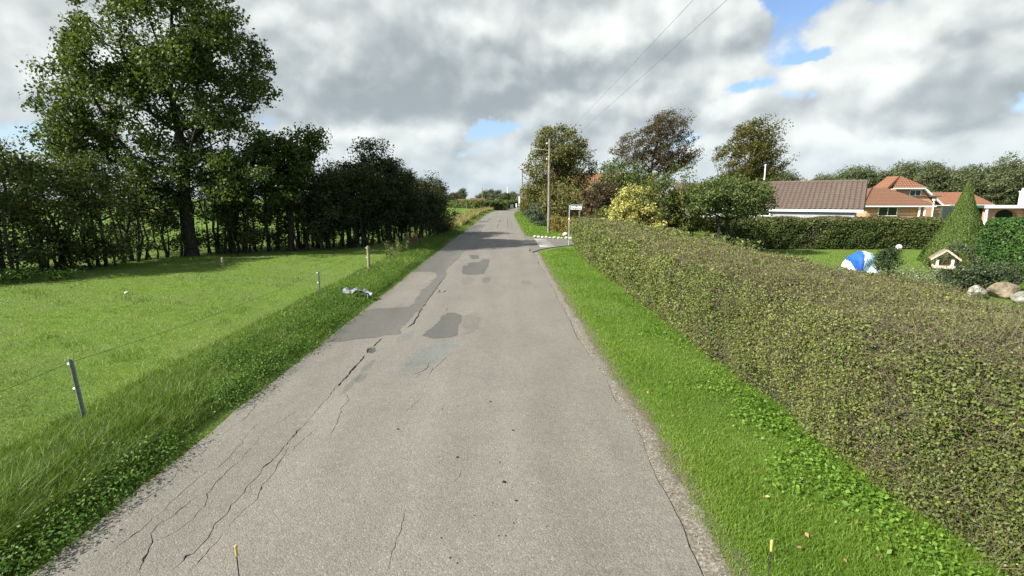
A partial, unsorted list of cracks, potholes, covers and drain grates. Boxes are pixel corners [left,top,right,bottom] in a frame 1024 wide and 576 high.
crack [57,338,382,575]
